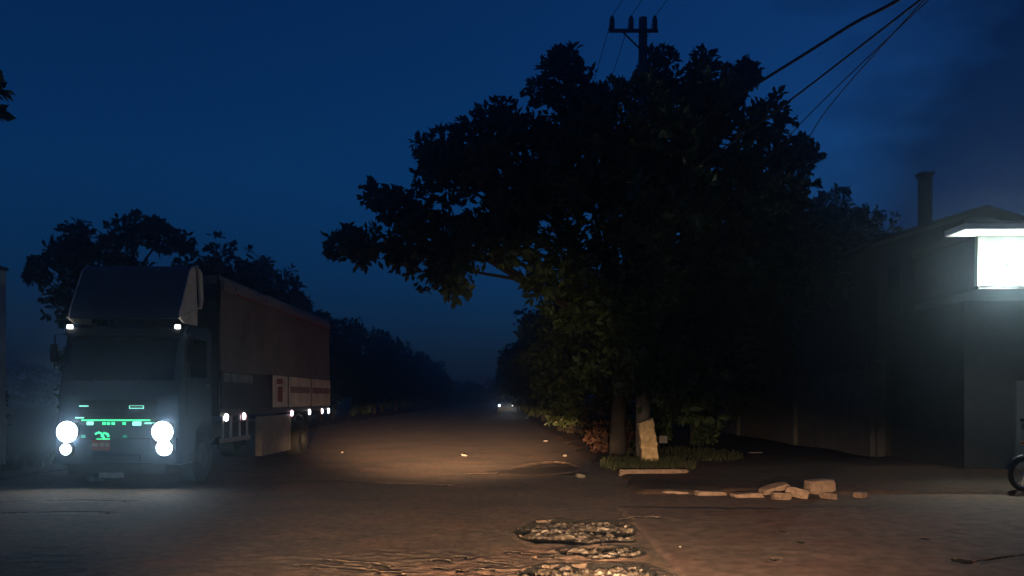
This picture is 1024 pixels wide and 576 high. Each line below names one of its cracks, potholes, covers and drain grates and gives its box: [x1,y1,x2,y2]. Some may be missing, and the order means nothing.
pothole [506,561,673,576]
pothole [506,518,643,549]
crack [966,554,1024,563]
pothole [546,544,653,561]
